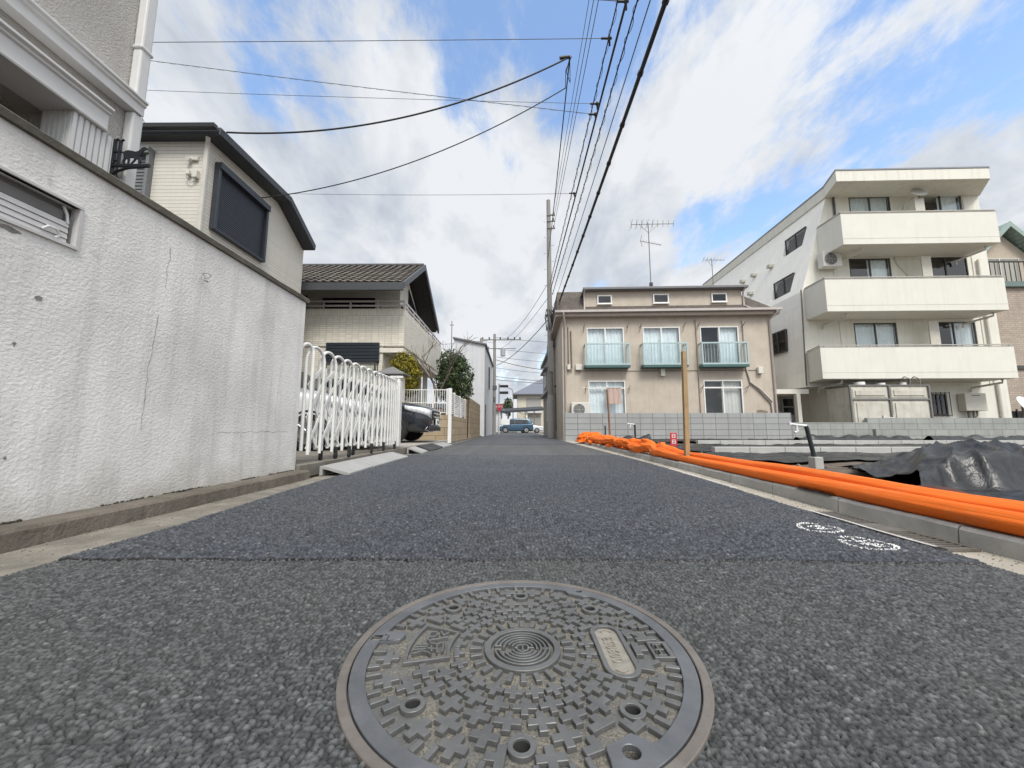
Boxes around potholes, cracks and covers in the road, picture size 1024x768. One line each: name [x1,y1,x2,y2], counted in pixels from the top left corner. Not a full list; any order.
manhole cover [335,580,715,768]
